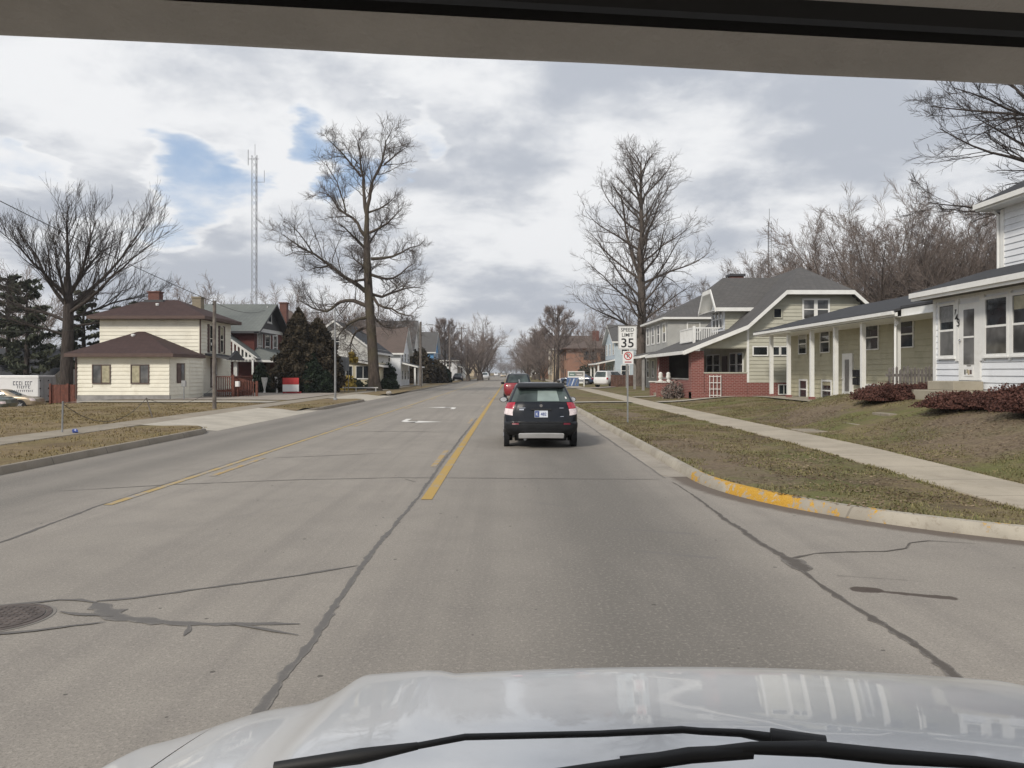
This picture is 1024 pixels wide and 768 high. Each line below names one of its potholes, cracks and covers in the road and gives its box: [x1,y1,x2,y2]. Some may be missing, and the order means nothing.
crack [578,418,980,678]
manhole cover [0,603,57,632]
